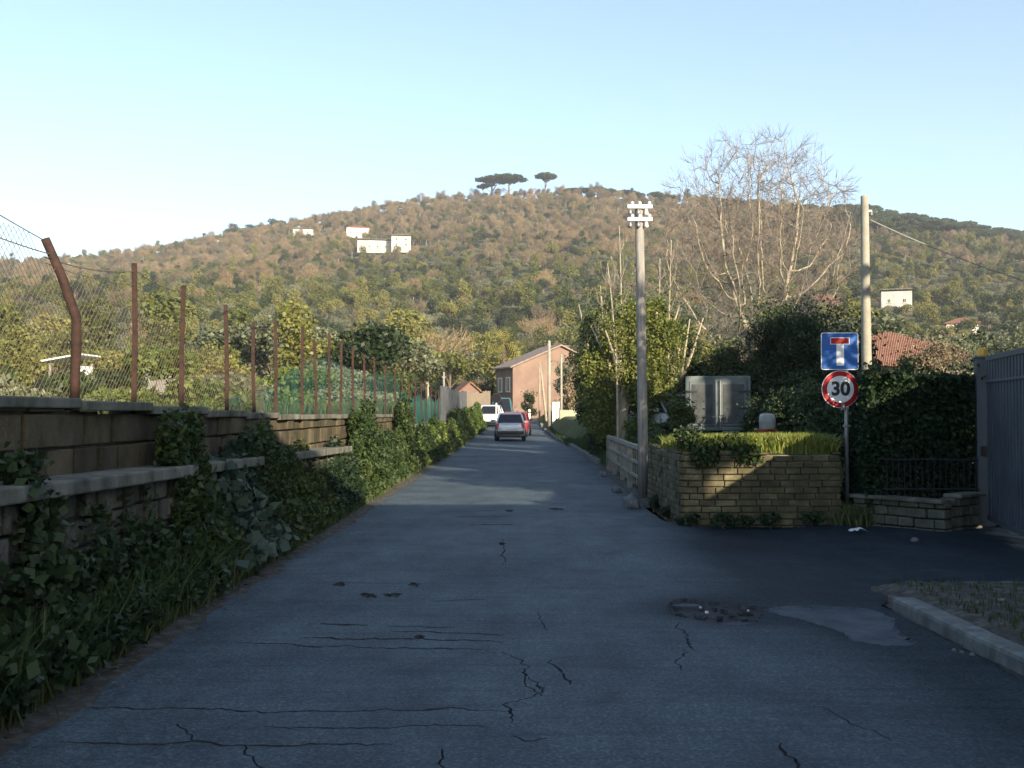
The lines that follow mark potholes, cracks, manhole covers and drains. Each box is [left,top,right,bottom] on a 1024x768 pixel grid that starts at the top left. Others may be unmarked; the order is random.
crack [58,651,572,768]
crack [779,743,801,768]
crack [674,623,699,672]
crack [812,705,891,741]
pothole [667,598,769,625]
